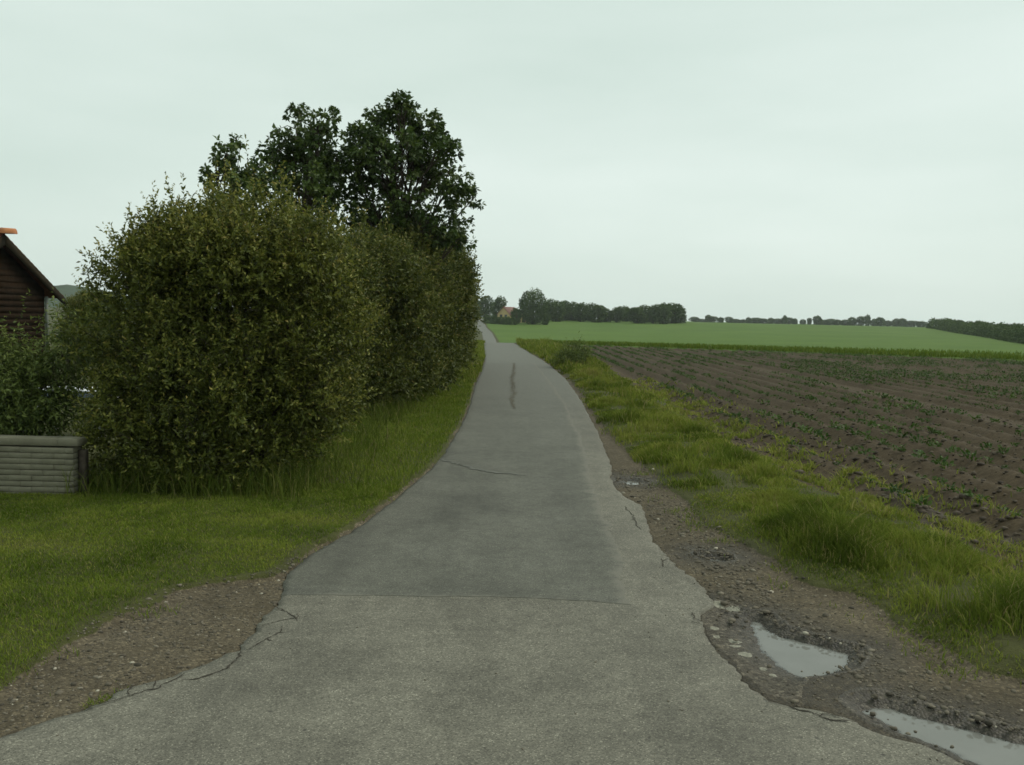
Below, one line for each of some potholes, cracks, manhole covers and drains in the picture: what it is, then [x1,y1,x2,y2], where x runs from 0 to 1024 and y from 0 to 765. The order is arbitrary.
pothole [837,687,1024,765]
crack [440,458,528,476]
pothole [701,598,873,700]
crack [81,606,299,711]
crack [508,362,516,409]
